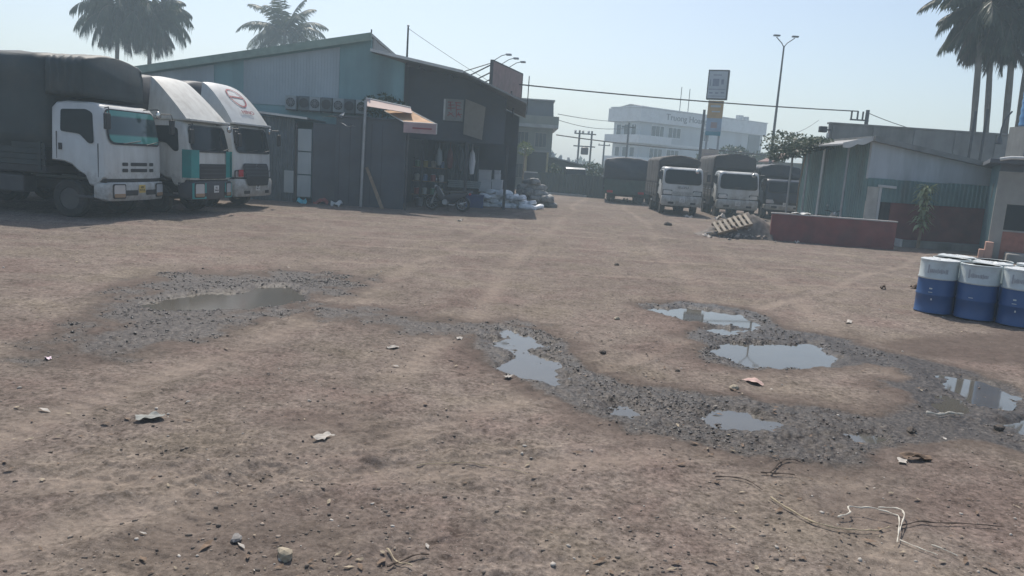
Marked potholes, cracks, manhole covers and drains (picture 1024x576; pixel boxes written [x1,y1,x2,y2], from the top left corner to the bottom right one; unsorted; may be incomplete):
pothole [684,322,777,340]
pothole [666,393,813,442]
pothole [459,320,598,395]
pothole [680,334,866,374]
pothole [883,366,1024,431]
pothole [628,300,783,332]
pothole [107,280,327,316]
